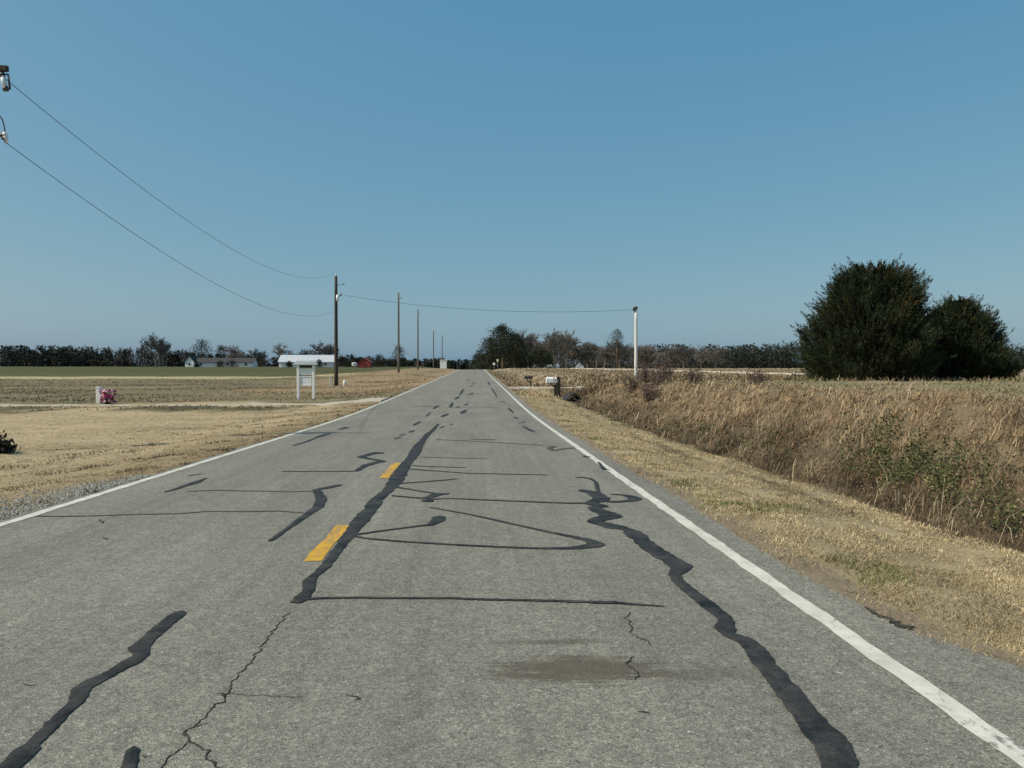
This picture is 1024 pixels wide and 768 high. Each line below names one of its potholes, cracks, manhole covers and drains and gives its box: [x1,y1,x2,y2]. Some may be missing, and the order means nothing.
crack [624,612,651,679]
crack [143,612,301,768]
